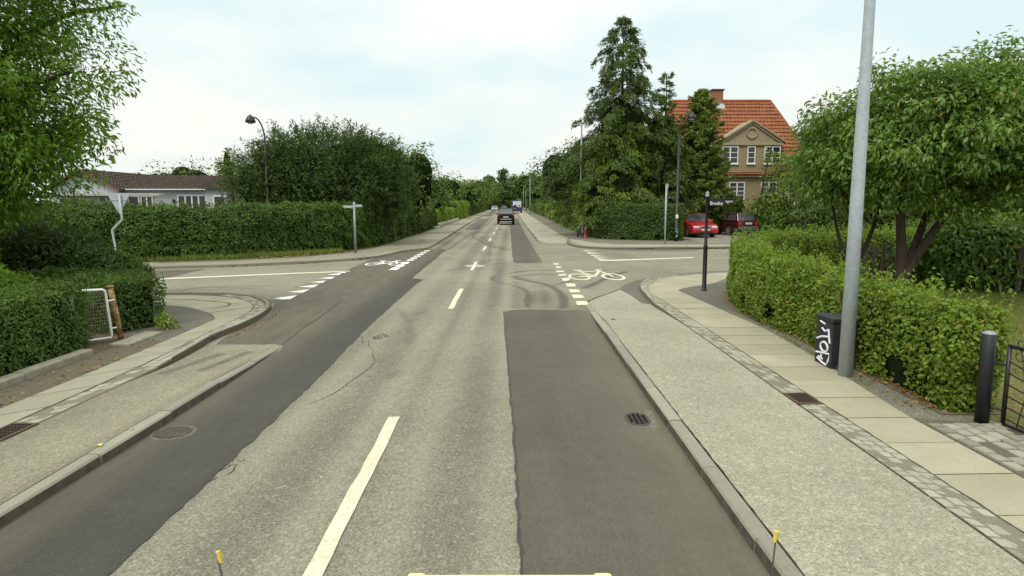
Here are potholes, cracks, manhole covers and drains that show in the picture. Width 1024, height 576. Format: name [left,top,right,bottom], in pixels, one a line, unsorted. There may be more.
crack [283,302,340,344]
drain grate [782,393,823,405]
manhole cover [153,426,193,439]
drain grate [0,423,39,442]
drain grate [624,413,651,426]
